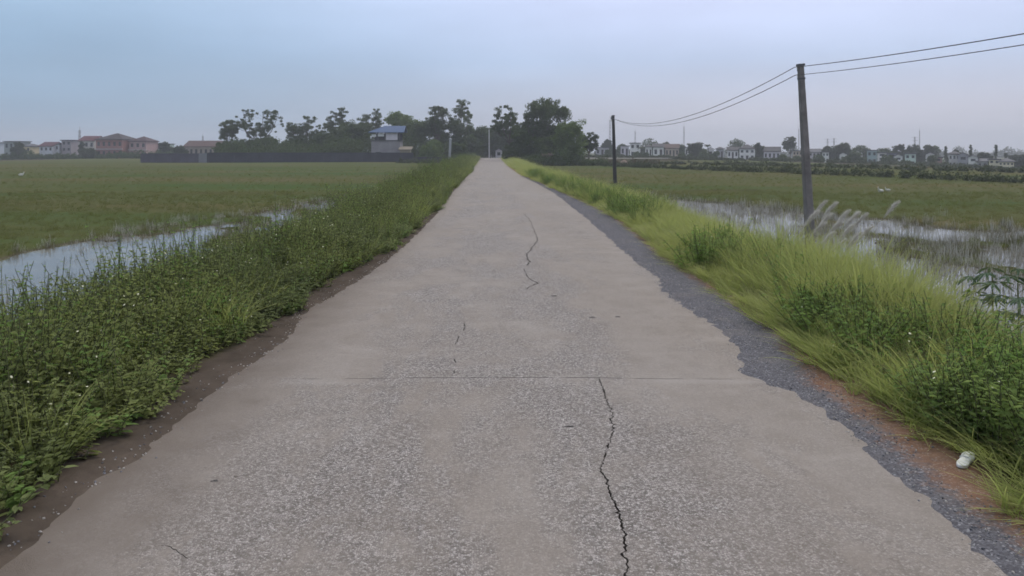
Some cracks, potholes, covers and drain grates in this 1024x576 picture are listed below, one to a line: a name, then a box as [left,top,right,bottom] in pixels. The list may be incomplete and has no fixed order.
crack [598,378,629,576]
crack [524,216,538,289]
